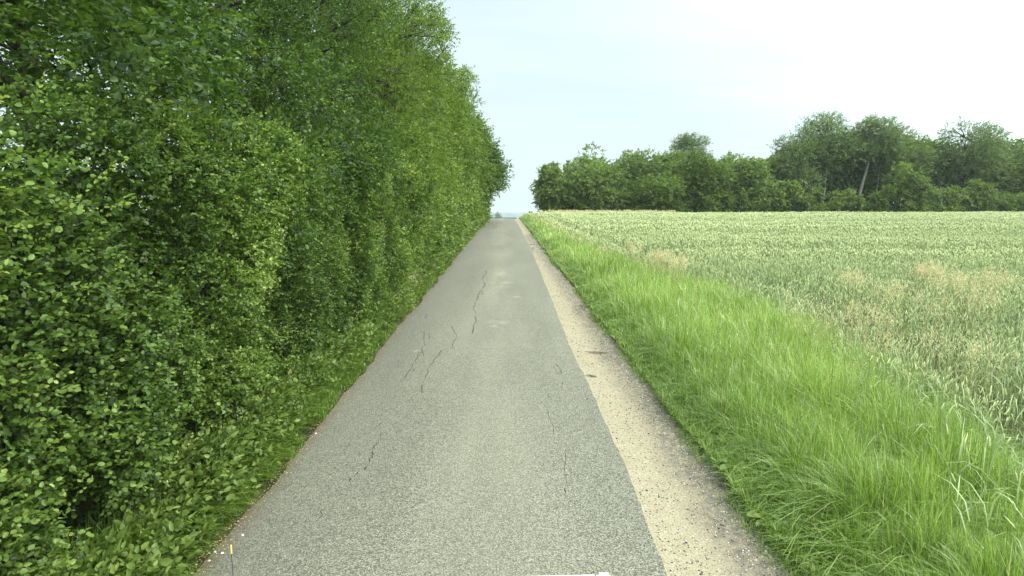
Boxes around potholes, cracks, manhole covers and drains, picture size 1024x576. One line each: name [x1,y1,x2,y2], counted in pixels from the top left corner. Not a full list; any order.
crack [545,364,568,498]
crack [401,270,488,392]
